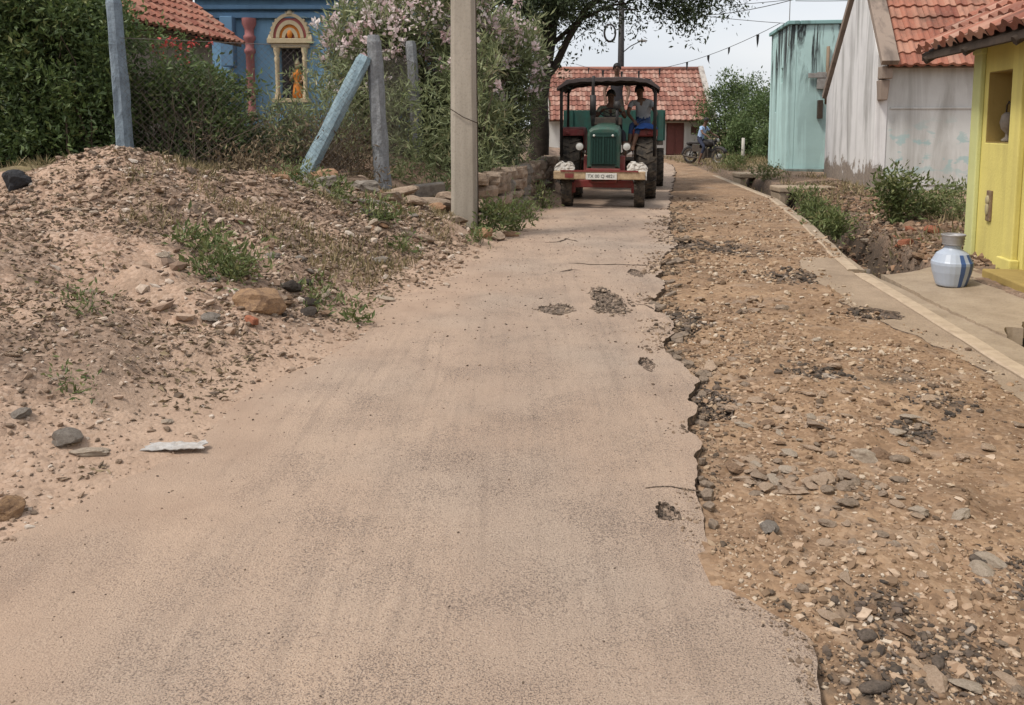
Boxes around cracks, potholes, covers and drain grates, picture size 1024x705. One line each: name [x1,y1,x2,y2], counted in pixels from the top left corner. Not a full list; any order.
pothole [590,290,626,314]
pothole [536,304,575,314]
pothole [655,501,681,521]
crack [645,486,702,498]
crack [561,263,662,272]
pothole [638,357,655,372]
